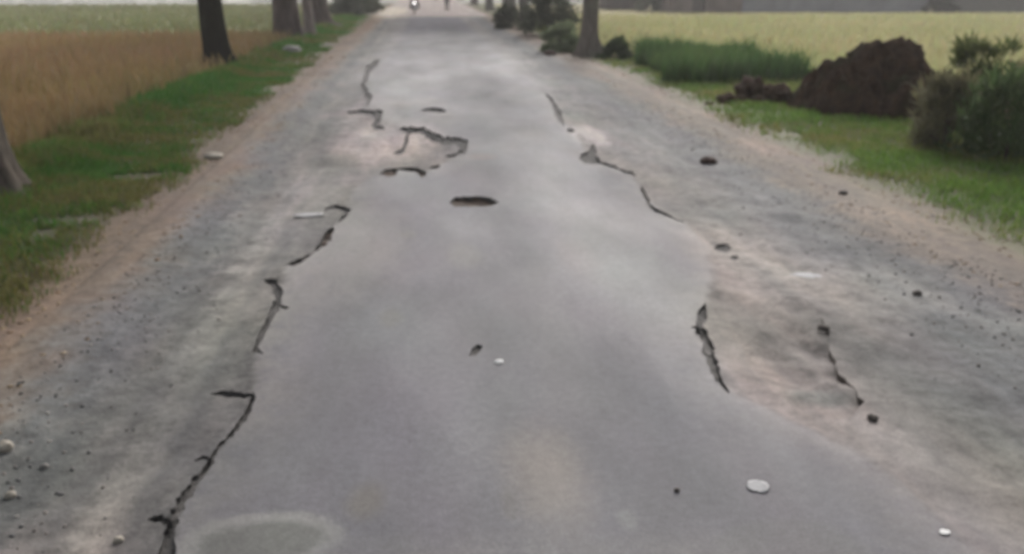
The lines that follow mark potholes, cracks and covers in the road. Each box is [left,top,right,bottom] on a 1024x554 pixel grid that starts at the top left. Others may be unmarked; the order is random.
crack [546,95,575,133]
crack [323,205,351,222]
pothole [449,196,499,207]
crack [147,391,256,554]
crack [347,59,468,157]
crack [691,303,730,393]
crack [252,279,289,354]
crack [641,186,683,222]
